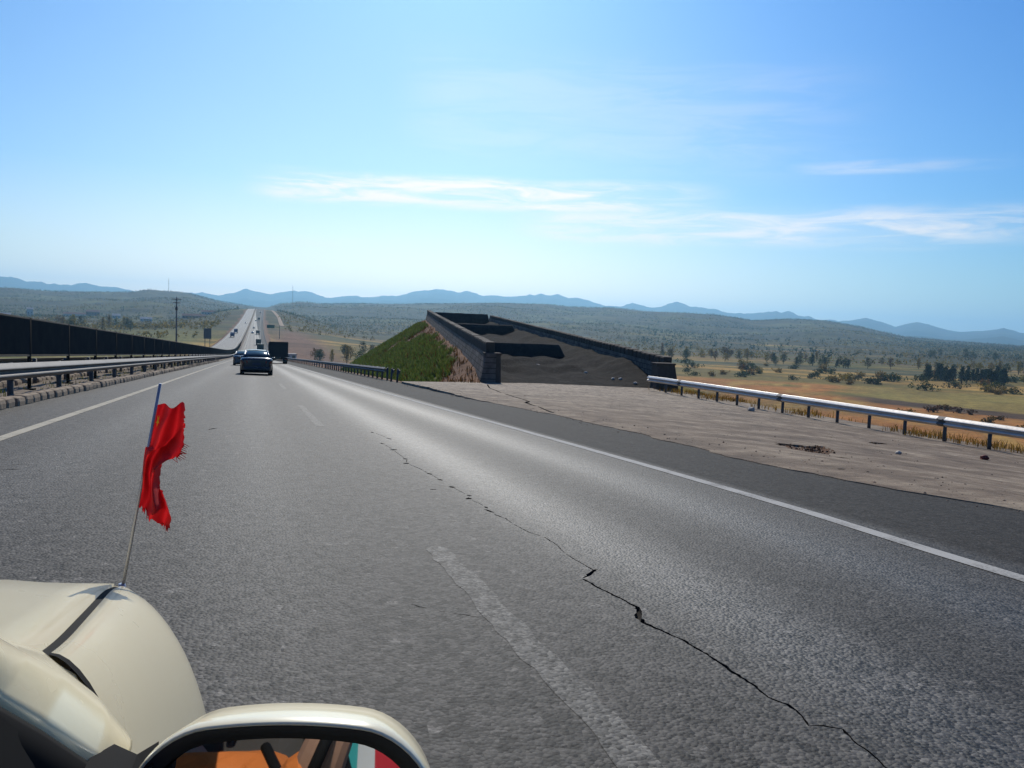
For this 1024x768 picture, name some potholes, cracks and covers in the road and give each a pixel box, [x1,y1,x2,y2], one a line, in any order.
crack [371,432,886,768]
pothole [777,443,836,455]
crack [487,384,566,413]
